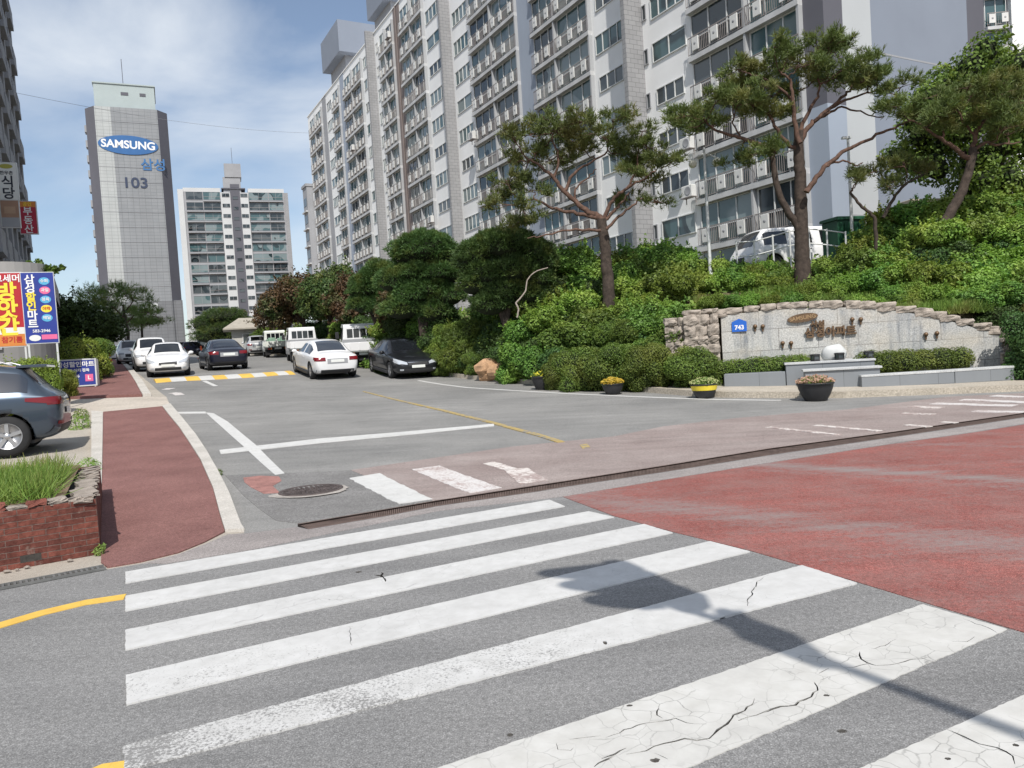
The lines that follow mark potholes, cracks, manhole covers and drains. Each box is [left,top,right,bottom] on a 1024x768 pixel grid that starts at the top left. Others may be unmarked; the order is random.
manhole cover [268,484,348,498]
crack [556,678,825,766]
